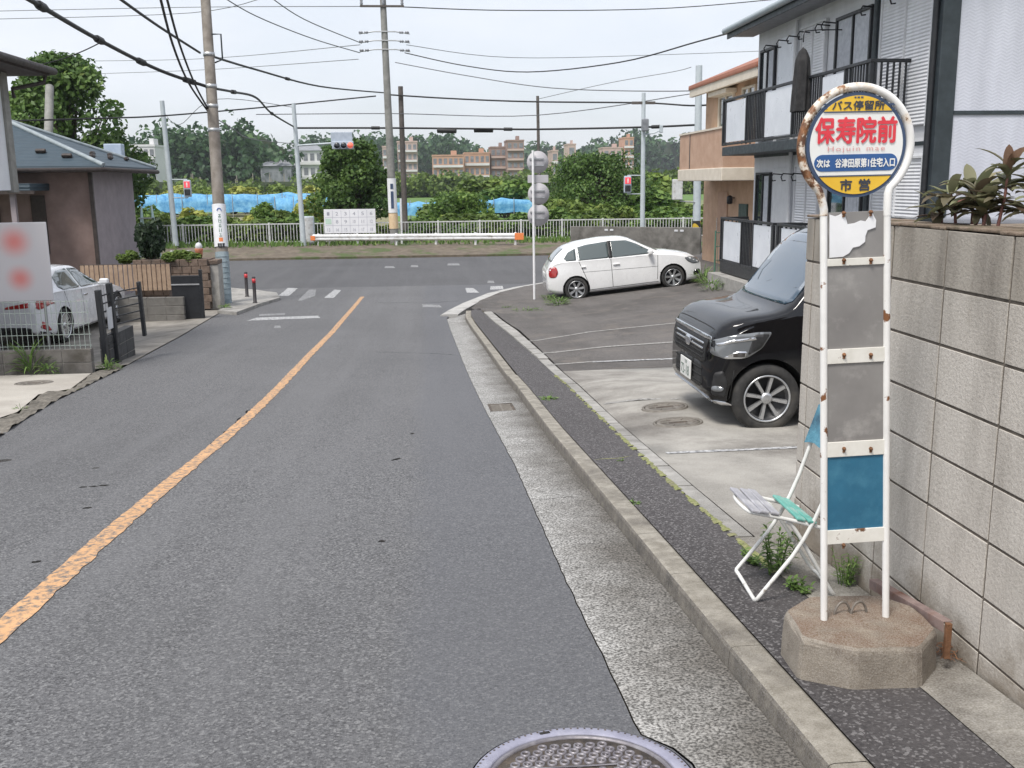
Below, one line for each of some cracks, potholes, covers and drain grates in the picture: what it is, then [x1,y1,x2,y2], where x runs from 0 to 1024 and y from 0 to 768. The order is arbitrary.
drain grate [488,403,516,428]
manhole cover [642,402,688,412]
manhole cover [653,417,703,428]
manhole cover [475,728,689,768]
